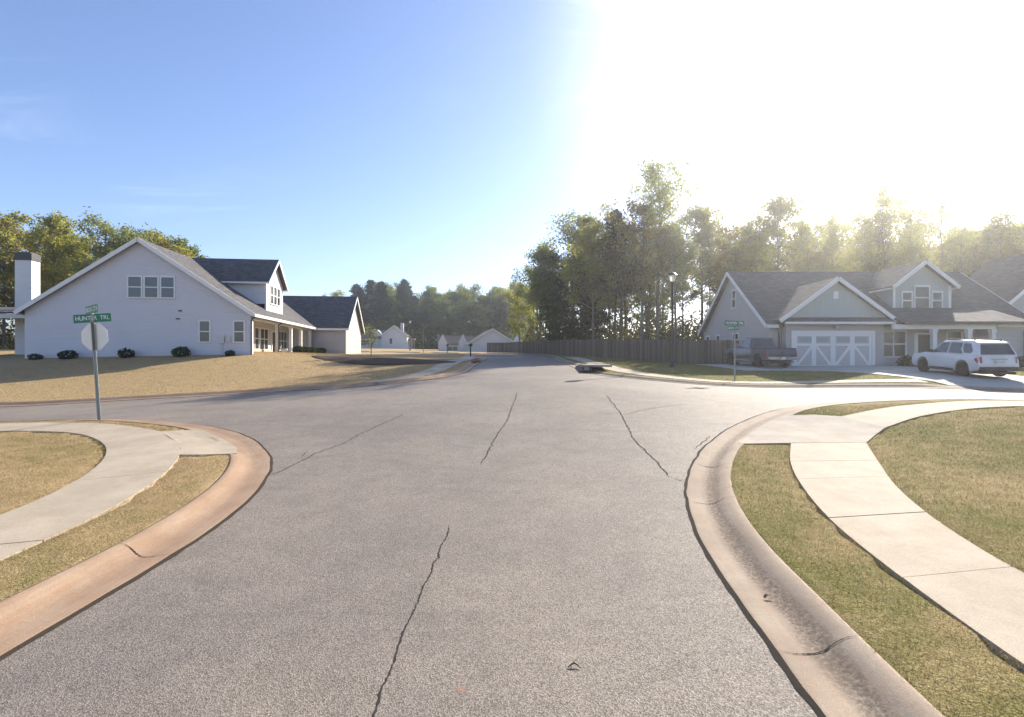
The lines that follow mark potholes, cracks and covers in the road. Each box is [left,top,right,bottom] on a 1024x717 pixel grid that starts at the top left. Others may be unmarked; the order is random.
crack [606,395,685,482]
crack [481,393,517,465]
crack [788,635,858,654]
crack [372,524,450,717]
